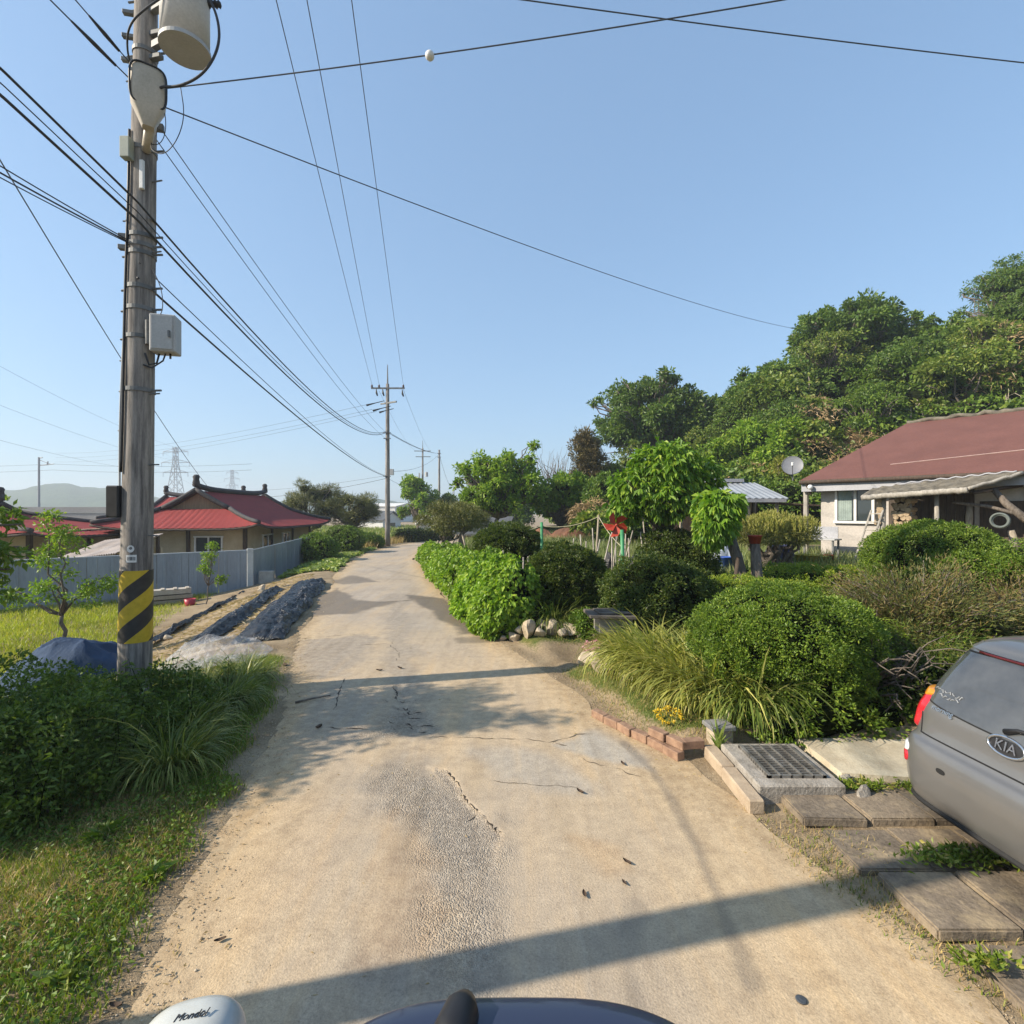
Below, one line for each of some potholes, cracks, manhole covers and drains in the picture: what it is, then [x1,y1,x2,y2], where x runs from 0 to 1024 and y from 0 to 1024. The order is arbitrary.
crack [385,685,637,776]
drain grate [721,744,846,805]
